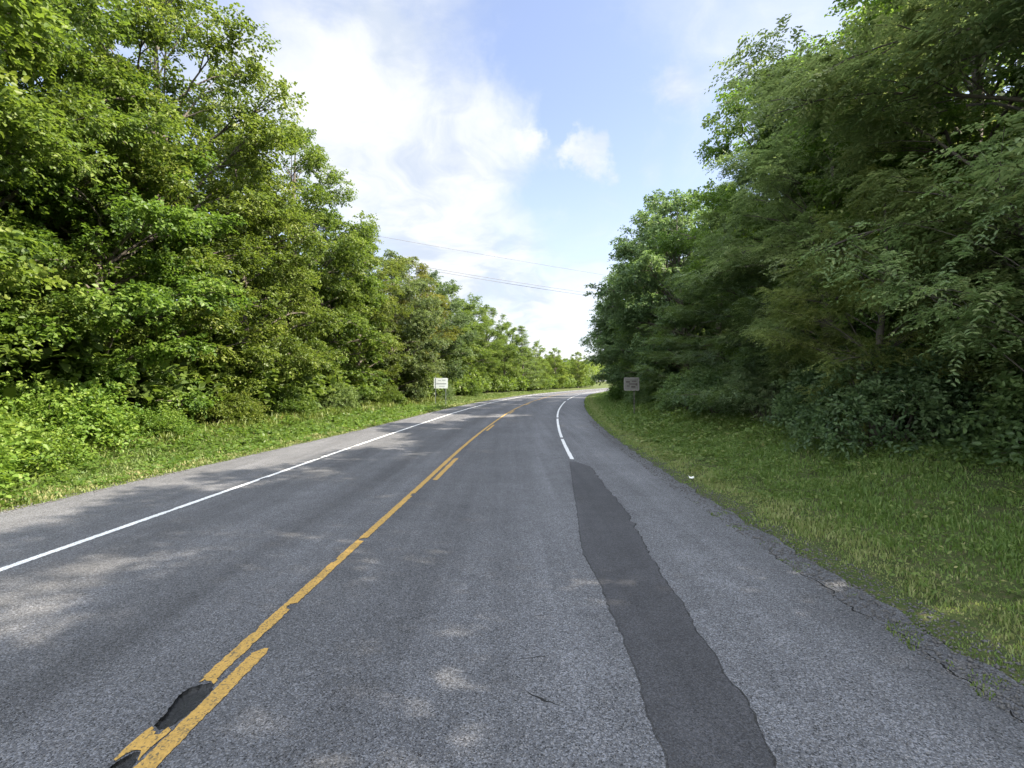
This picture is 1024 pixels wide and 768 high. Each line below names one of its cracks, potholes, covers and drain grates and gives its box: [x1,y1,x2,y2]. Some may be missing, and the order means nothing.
crack [775,556,1023,723]
pothole [154,683,214,730]
pothole [110,752,140,768]
